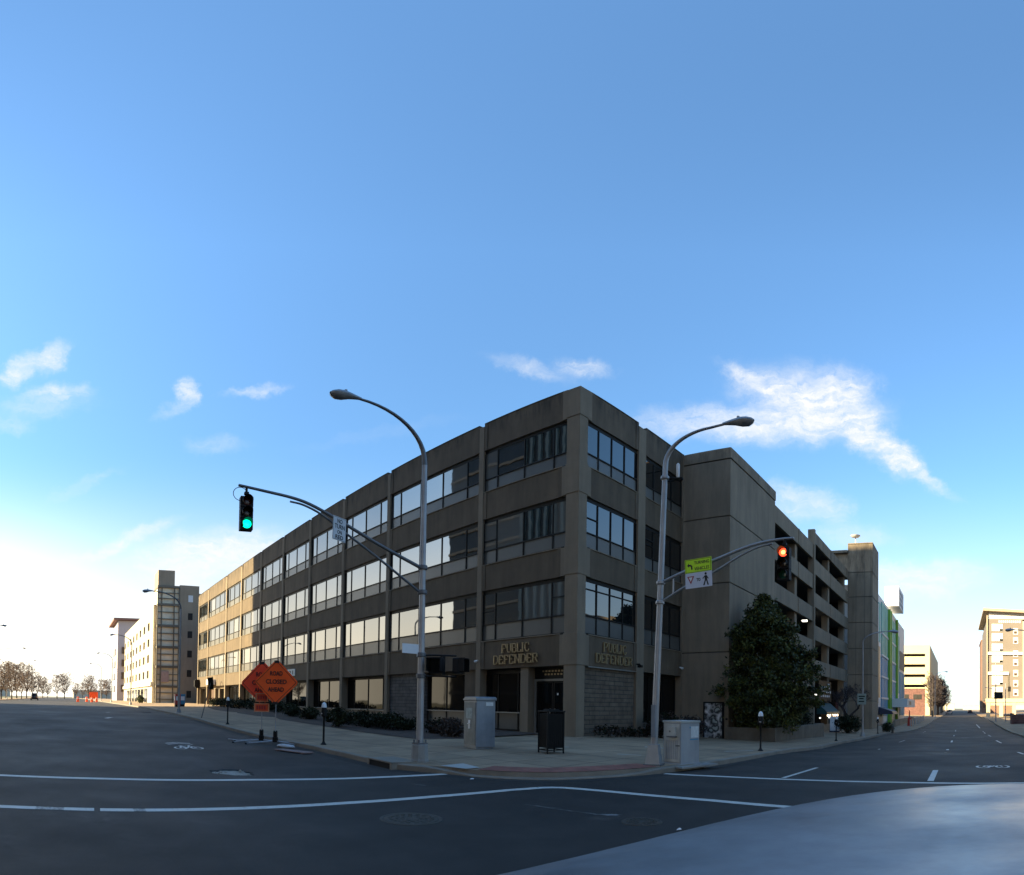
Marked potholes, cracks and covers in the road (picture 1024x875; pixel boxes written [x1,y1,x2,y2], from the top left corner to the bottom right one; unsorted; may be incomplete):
manhole cover [621,817,662,826]
manhole cover [380,813,443,826]
